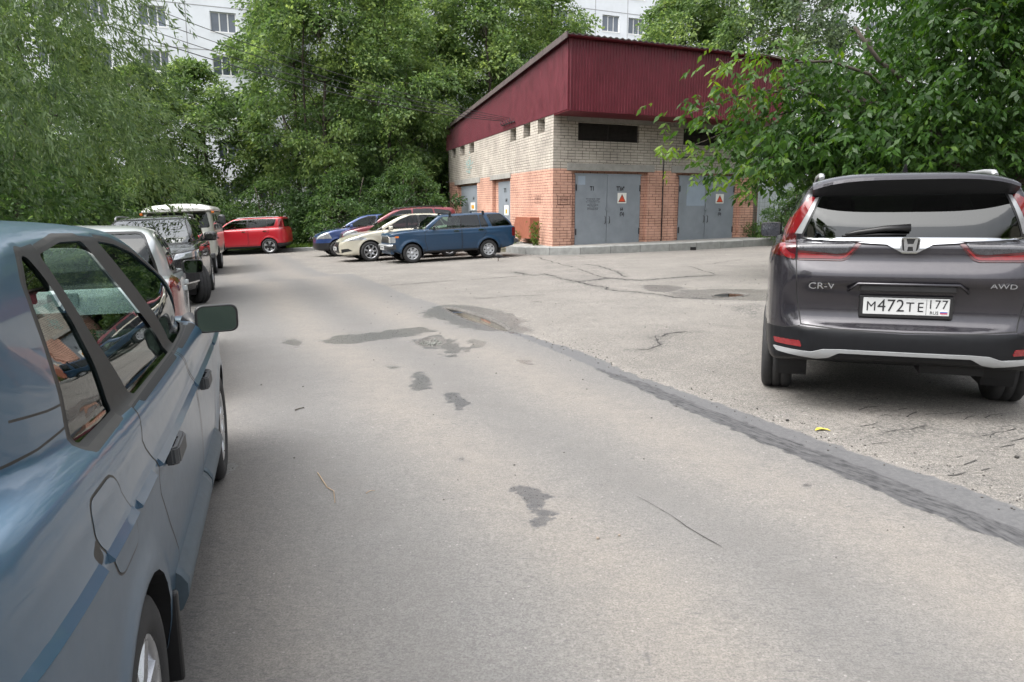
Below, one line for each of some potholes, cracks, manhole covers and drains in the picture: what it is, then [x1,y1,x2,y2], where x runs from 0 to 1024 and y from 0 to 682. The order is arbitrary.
crack [387,256,714,299]
pothole [416,337,447,347]
pothole [443,307,510,331]
